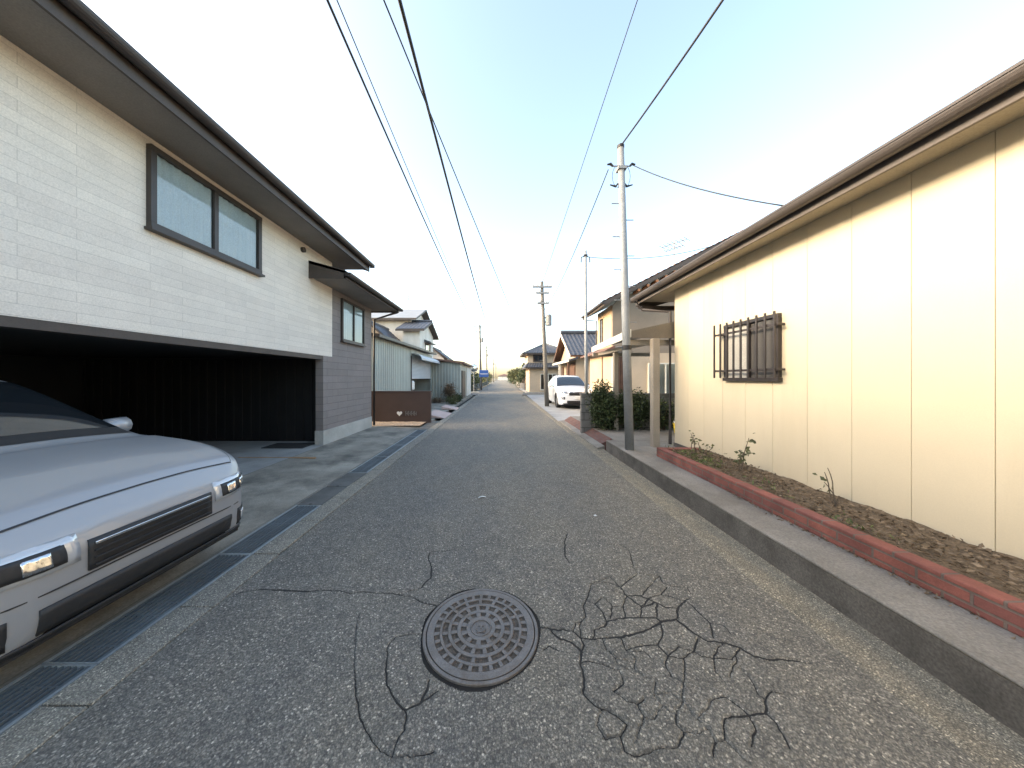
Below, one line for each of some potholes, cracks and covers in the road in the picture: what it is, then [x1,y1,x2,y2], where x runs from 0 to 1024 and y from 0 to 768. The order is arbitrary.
drain grate [218,505,321,555]
crack [232,549,454,607]
drain grate [376,445,406,456]
crack [353,616,438,758]
manhole cover [420,589,544,692]
drain grate [0,664,97,735]
drain grate [349,456,390,474]
crack [537,534,806,762]
